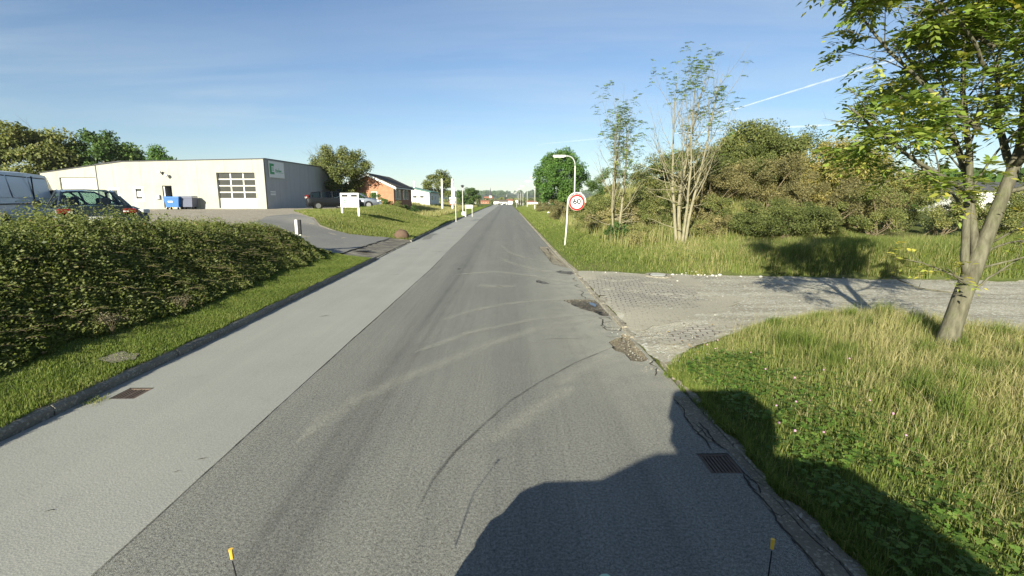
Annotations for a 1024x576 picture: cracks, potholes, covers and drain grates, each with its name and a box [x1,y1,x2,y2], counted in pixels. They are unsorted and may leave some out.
drain grate [697,454,743,473]
crack [674,399,723,449]
pothole [609,334,648,362]
drain grate [110,388,153,399]
pothole [564,299,609,316]
